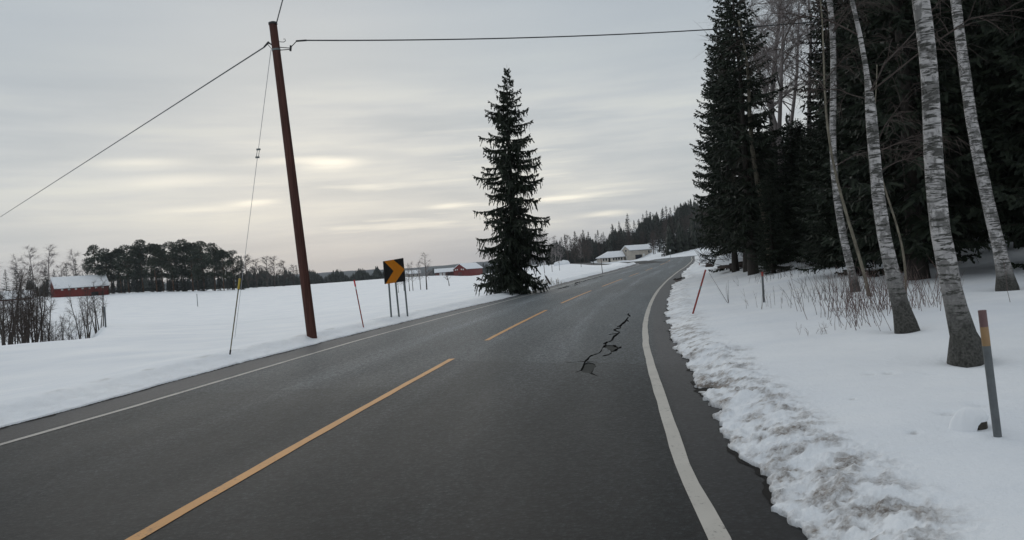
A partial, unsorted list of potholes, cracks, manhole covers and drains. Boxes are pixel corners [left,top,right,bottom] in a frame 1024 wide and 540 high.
crack [575,313,630,376]
